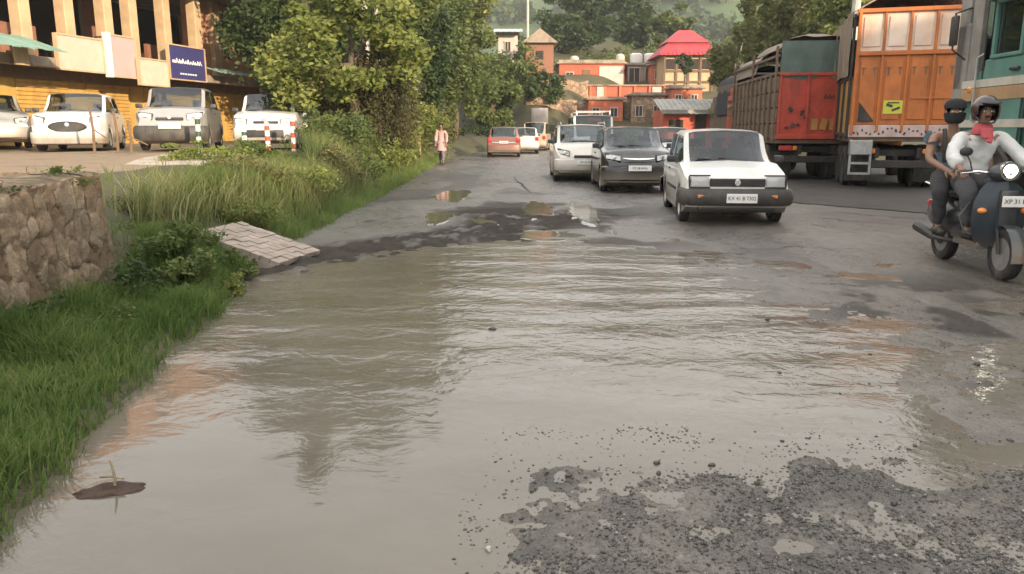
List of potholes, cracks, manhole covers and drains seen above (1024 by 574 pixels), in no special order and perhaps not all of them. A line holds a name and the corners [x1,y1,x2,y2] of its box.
pothole [424,210,455,226]
pothole [566,201,601,227]
pothole [521,200,556,221]
pothole [504,225,586,242]
pothole [743,535,841,558]
pothole [428,189,472,203]
pothole [464,214,502,226]
pothole [630,485,695,509]
